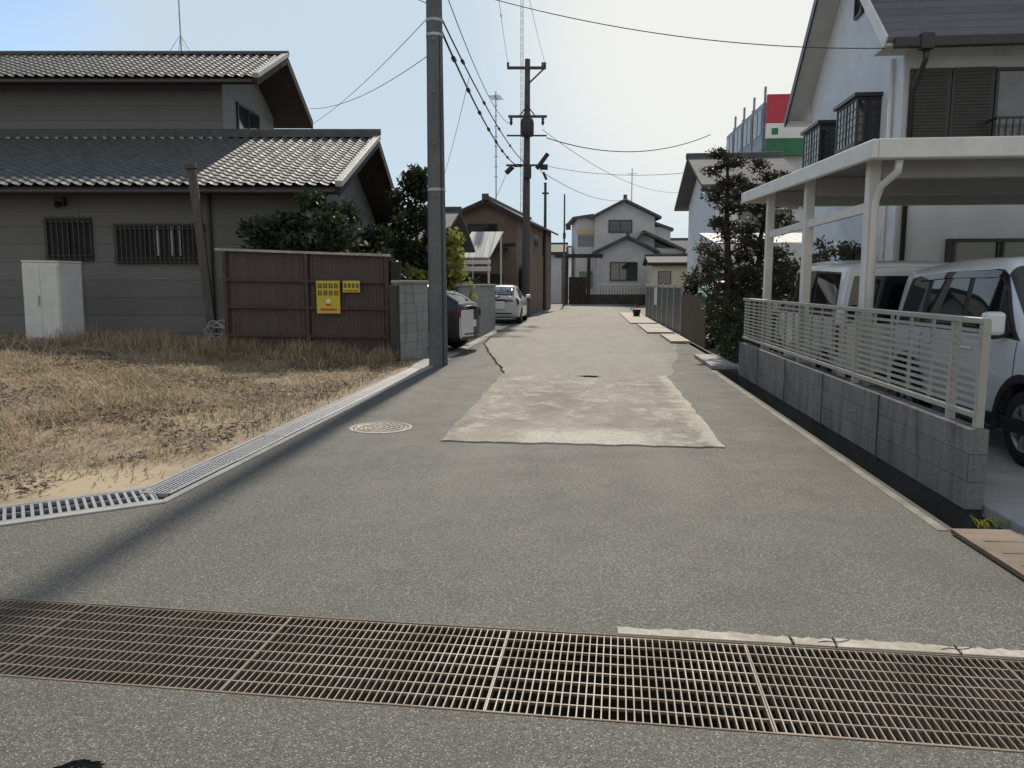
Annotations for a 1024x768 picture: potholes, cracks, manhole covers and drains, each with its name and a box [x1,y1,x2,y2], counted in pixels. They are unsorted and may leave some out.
drain grate [0,599,90,659]
drain grate [484,630,775,732]
drain grate [1000,659,1024,682]
crack [483,323,516,374]
manhole cover [348,422,412,434]
drain grate [220,617,509,711]
